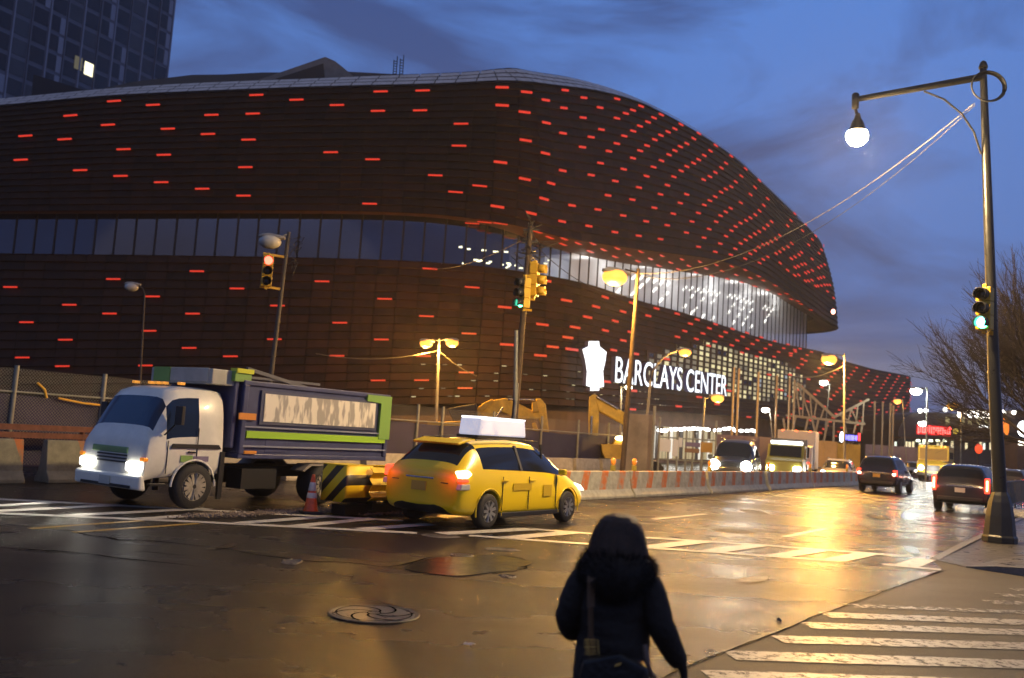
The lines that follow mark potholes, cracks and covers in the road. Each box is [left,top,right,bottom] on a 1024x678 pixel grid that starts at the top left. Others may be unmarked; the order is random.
manhole cover [328,604,420,623]
